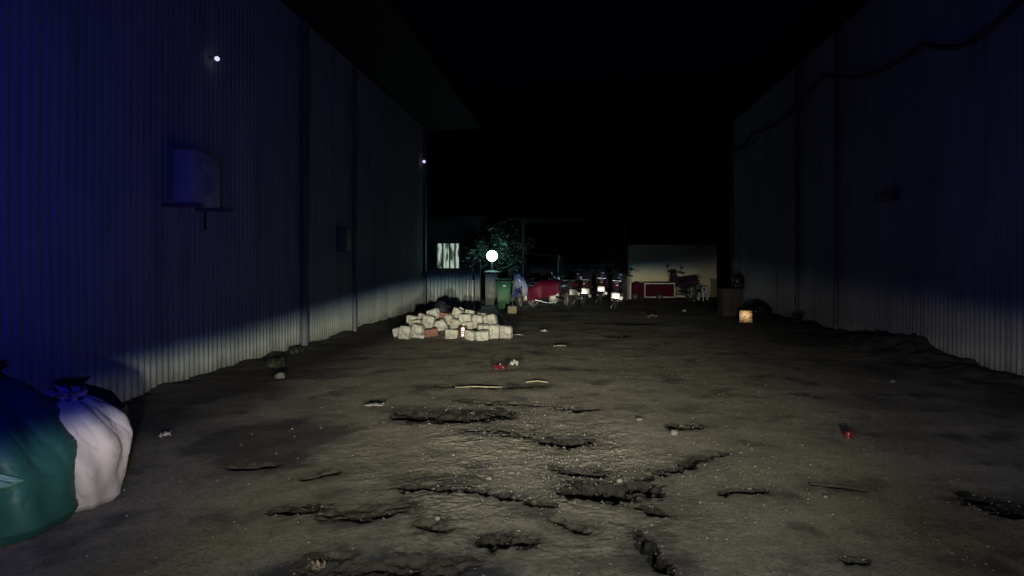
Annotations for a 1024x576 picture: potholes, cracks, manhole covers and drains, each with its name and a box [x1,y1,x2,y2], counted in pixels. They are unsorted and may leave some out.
pothole [838,556,872,566]
pothole [663,423,704,431]
pothole [311,498,420,525]
pothole [555,475,666,506]
pothole [299,469,343,482]
pothole [220,462,285,471]
pothole [717,487,770,498]
pothole [533,436,596,451]
pothole [389,407,520,425]
pothole [540,464,609,479]
crack [631,505,677,576]
pothole [474,531,542,554]
